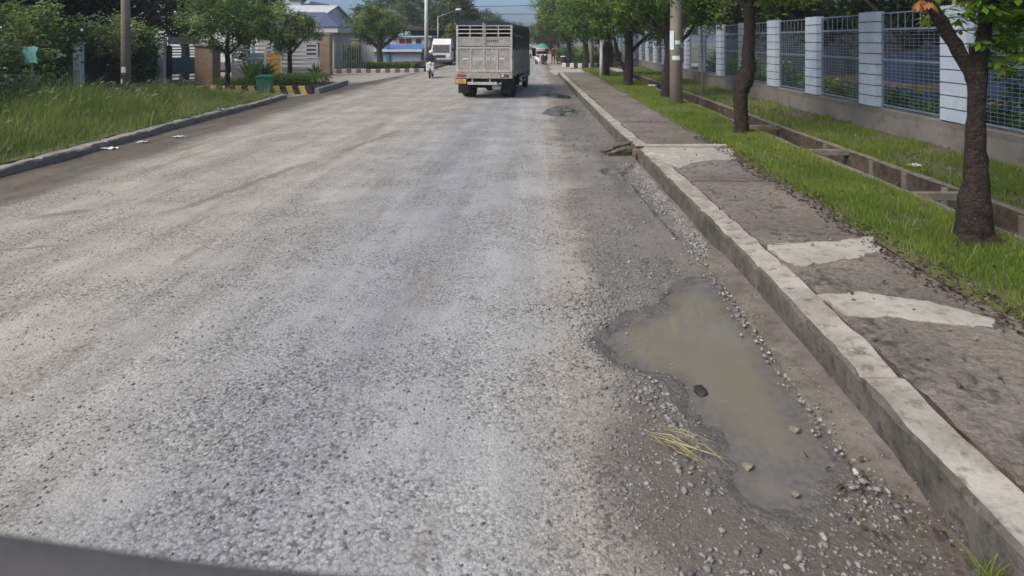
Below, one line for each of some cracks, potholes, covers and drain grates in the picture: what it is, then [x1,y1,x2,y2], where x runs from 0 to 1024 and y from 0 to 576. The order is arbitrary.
pothole [584,276,855,536]
pothole [542,105,586,118]
